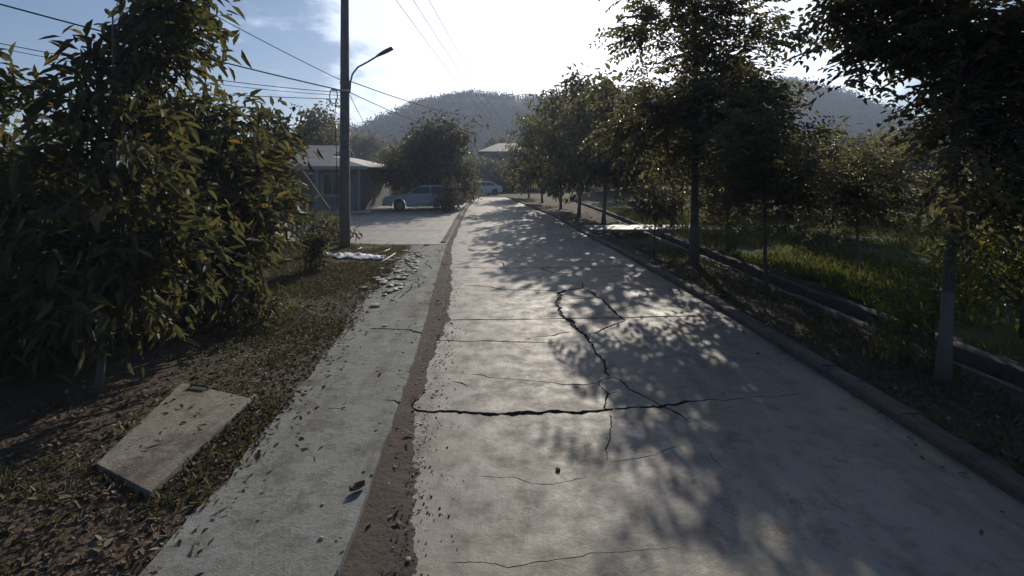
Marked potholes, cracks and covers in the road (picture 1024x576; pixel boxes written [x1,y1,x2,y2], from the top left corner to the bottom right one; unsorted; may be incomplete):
crack [476,476,585,485]
crack [454,547,672,568]
crack [387,268,798,462]
